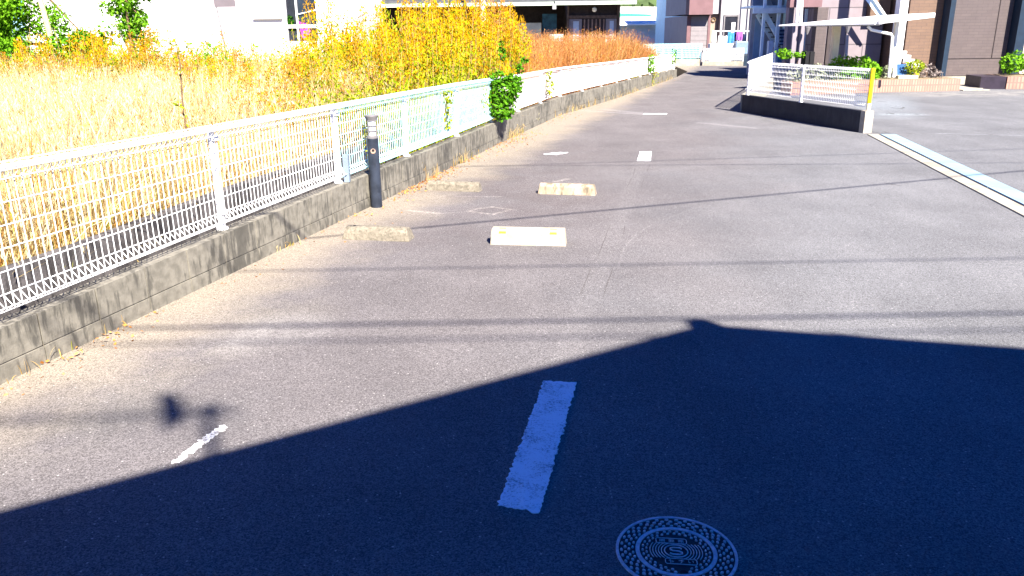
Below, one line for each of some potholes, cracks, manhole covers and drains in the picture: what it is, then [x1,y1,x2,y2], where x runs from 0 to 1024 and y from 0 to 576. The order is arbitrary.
manhole cover [616,516,738,576]
crack [580,165,650,297]
